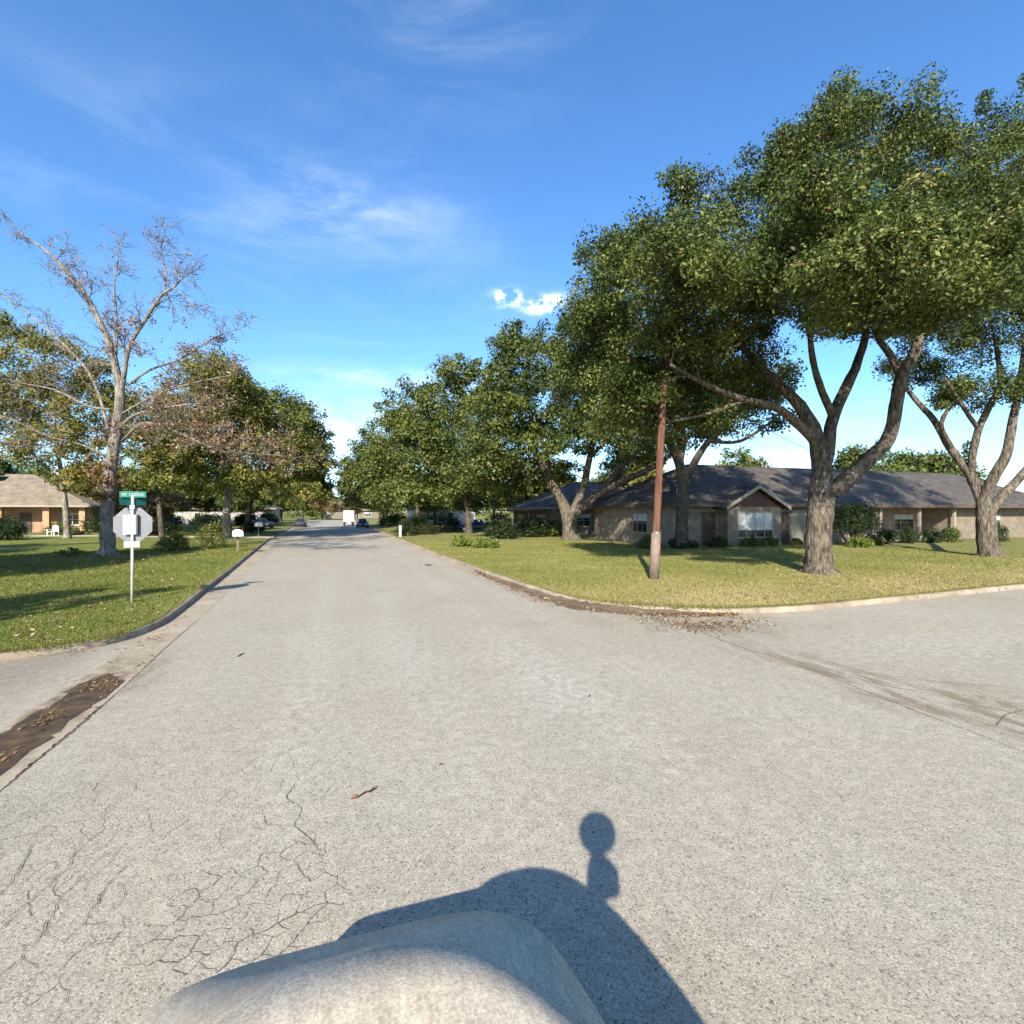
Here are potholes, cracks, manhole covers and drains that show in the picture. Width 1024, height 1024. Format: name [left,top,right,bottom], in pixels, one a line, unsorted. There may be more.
crack [105,711,349,975]
crack [0,783,129,1022]
